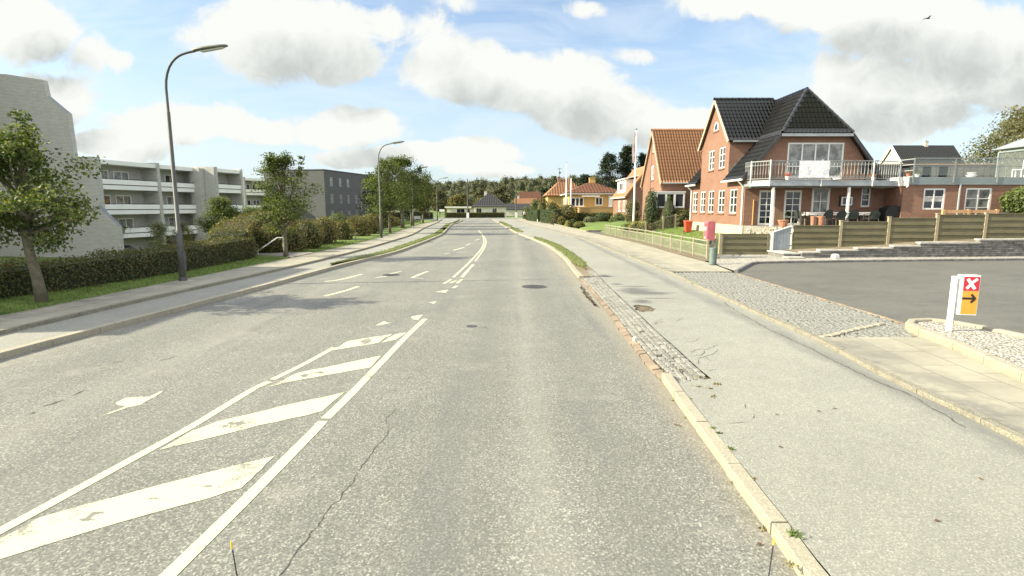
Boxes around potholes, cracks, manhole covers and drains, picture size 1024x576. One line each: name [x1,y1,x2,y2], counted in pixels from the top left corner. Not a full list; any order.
crack [280,378,409,575]
